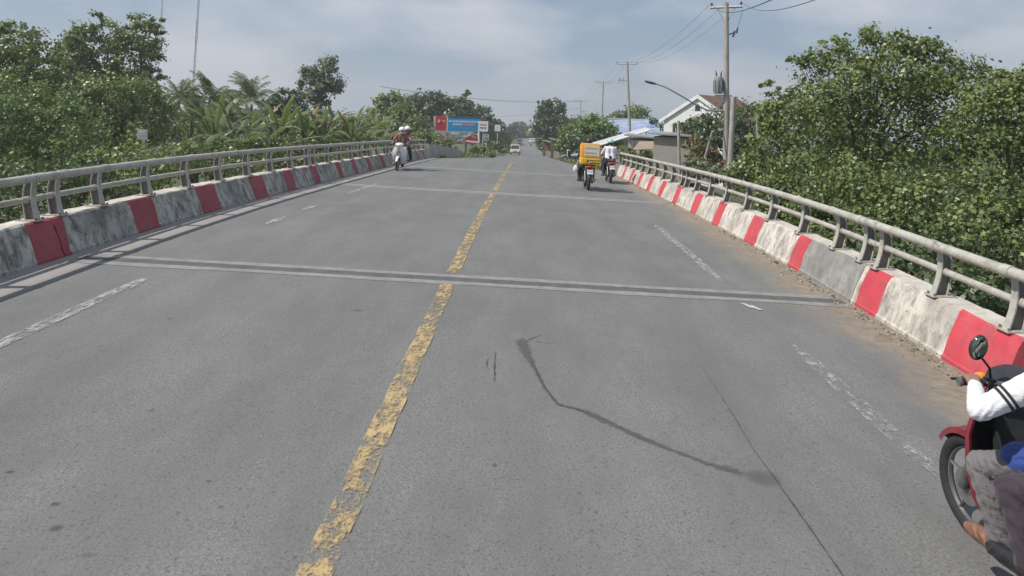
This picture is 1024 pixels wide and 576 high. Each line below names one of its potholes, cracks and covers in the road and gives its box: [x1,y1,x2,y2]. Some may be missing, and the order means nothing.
crack [517,335,843,575]
